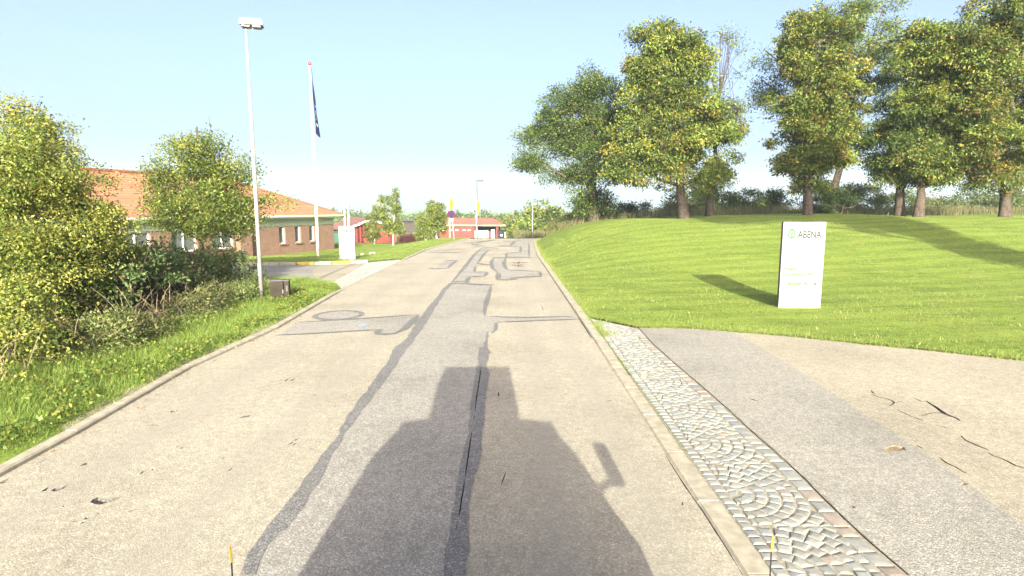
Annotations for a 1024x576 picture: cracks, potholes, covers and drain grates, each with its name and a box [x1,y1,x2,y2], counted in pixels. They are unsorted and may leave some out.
pothole [91,496,122,505]
crack [642,332,1023,575]
